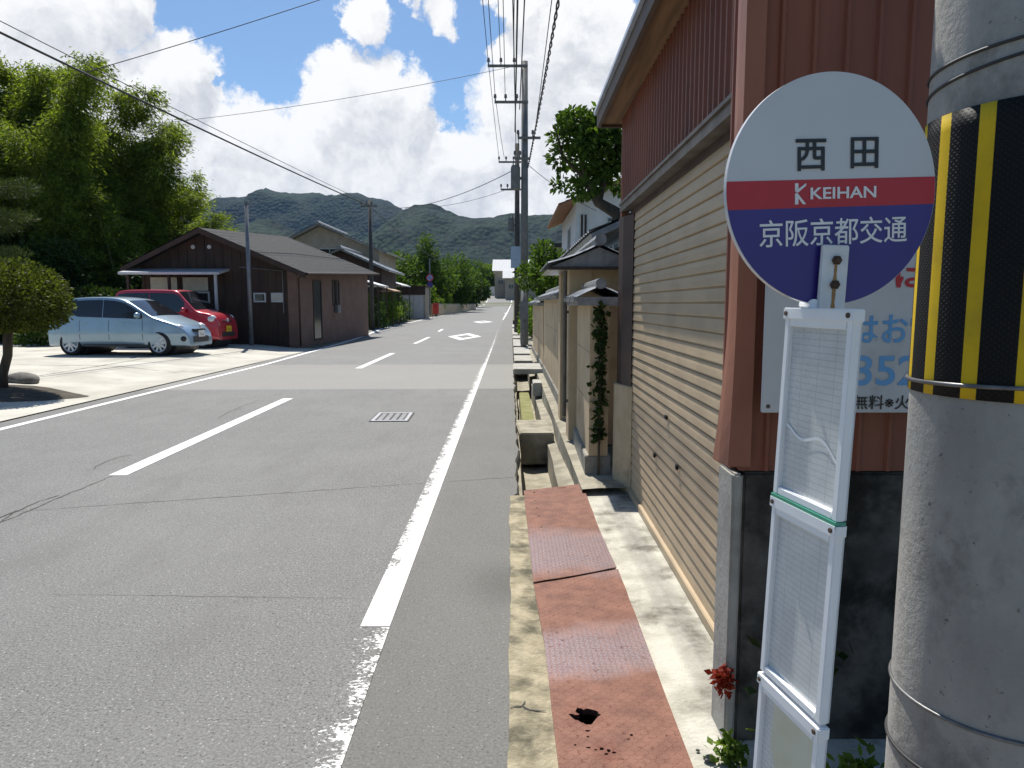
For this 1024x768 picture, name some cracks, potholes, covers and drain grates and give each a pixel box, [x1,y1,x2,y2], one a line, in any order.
crack [0,455,507,522]
